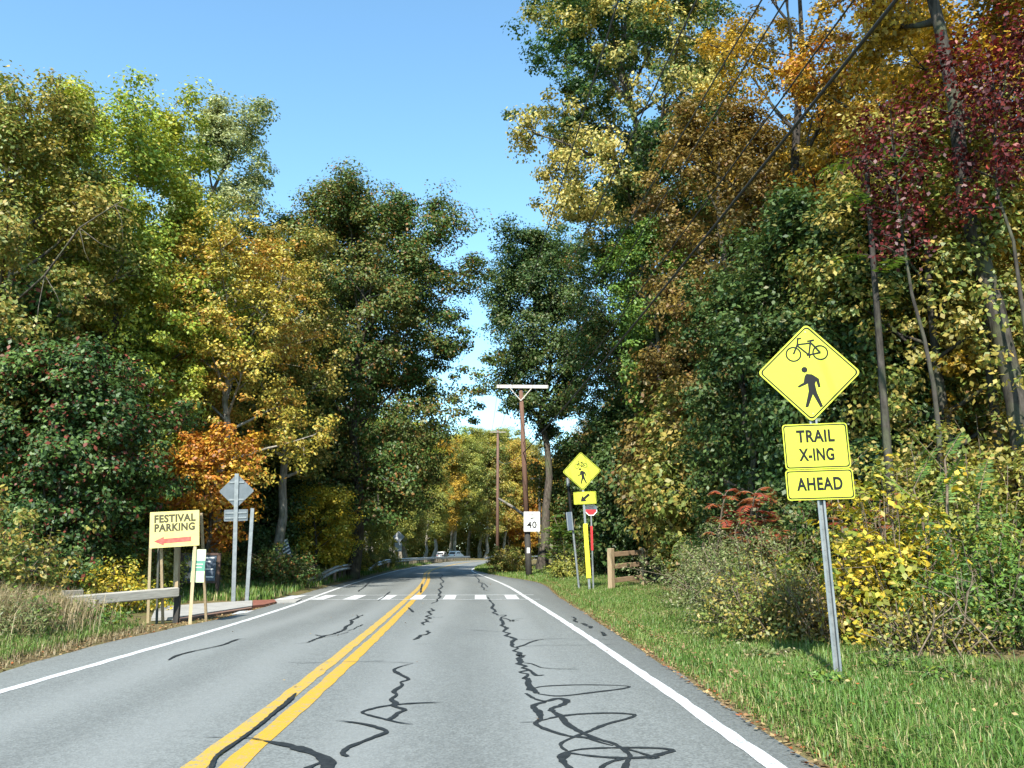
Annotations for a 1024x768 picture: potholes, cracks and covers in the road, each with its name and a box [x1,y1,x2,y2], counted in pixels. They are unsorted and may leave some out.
crack [408,573,444,625]
crack [295,615,363,644]
crack [168,638,243,660]
